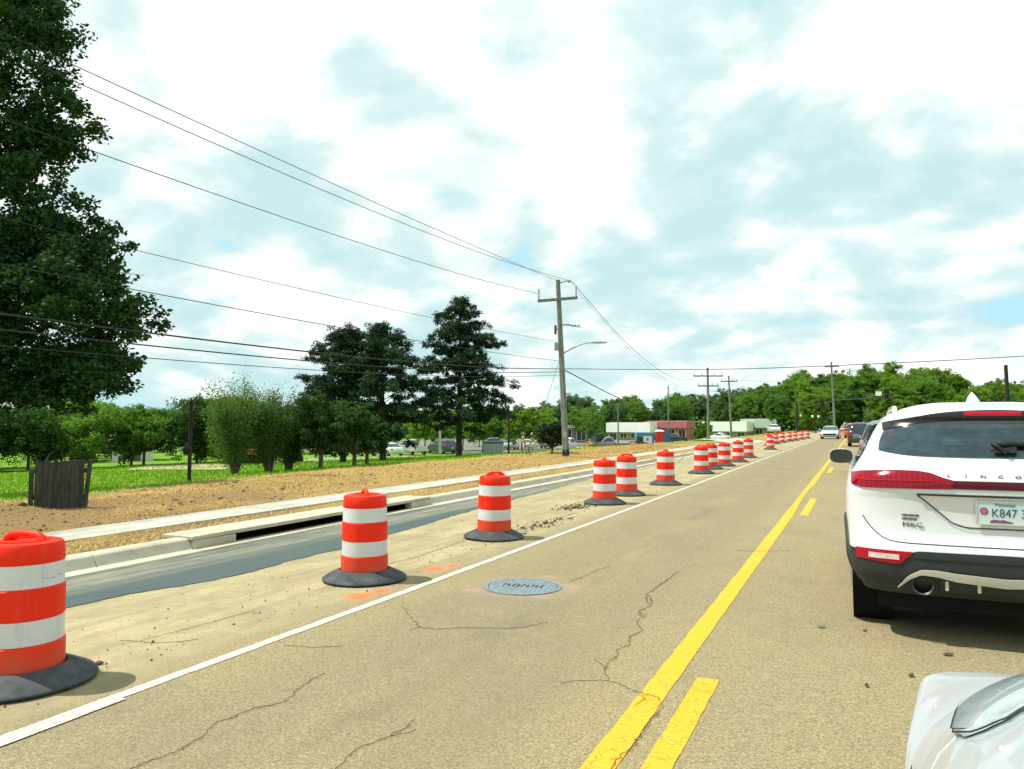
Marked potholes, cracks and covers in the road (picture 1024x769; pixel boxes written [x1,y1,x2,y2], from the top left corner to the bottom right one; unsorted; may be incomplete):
crack [335,720,416,769]
crack [130,673,324,769]
drain grate [162,495,438,551]
crack [560,571,680,769]
crack [405,610,546,630]
manhole cover [484,578,562,595]
